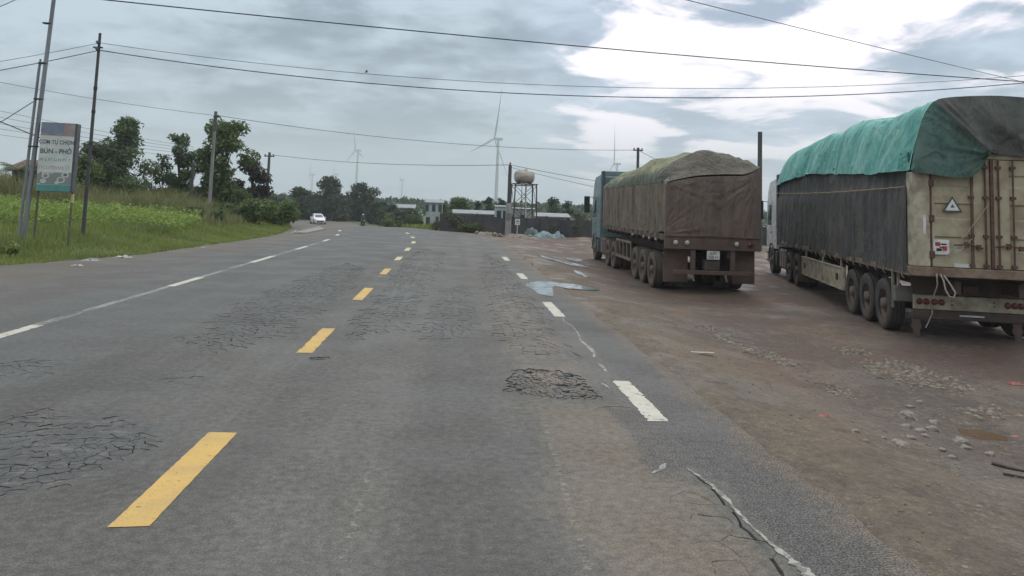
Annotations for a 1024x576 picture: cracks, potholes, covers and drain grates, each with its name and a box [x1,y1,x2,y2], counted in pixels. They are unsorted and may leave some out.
crack [670,475,784,576]
pothole [502,368,602,401]
crack [0,249,579,498]
